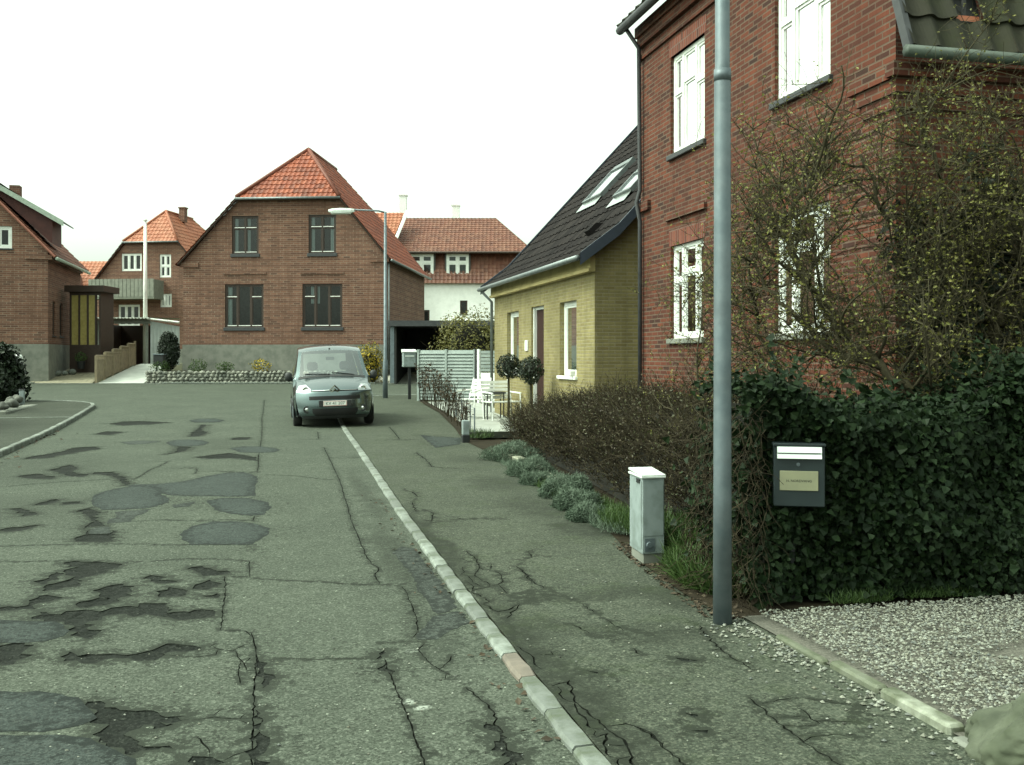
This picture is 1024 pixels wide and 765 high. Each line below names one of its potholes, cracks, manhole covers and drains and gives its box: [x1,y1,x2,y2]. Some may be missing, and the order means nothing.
pothole [76,584,134,608]
crack [517,646,686,765]
pothole [85,701,183,755]
pothole [0,595,63,611]
pothole [193,580,222,590]
pothole [26,447,100,459]
pothole [42,561,122,591]
pothole [145,575,176,583]
pothole [51,465,88,477]
pothole [33,572,64,585]
crack [750,698,853,765]
crack [462,551,544,618]
